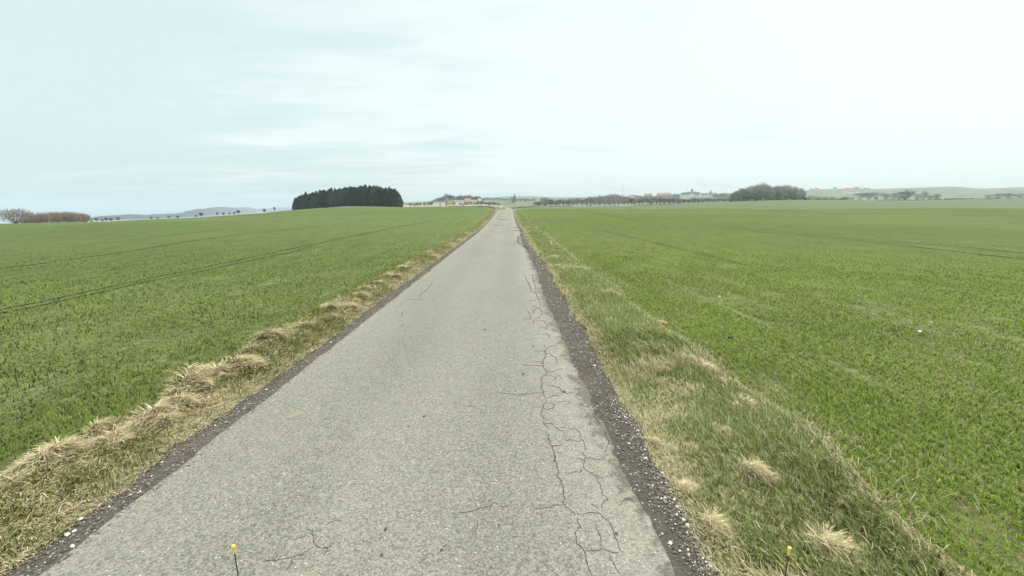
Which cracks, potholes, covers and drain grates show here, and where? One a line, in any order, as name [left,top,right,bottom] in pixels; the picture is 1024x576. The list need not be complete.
crack [268,520,339,566]
crack [500,276,635,574]
